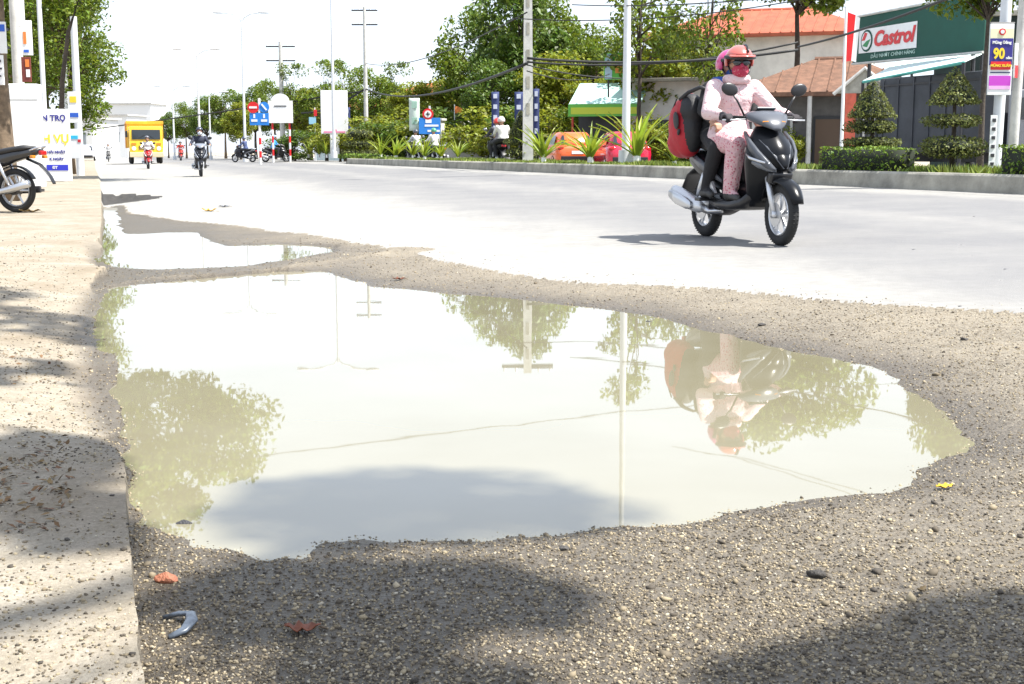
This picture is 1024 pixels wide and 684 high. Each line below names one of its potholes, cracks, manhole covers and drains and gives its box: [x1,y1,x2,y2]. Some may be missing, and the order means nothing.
pothole [89,202,435,290]
pothole [82,250,1024,684]
